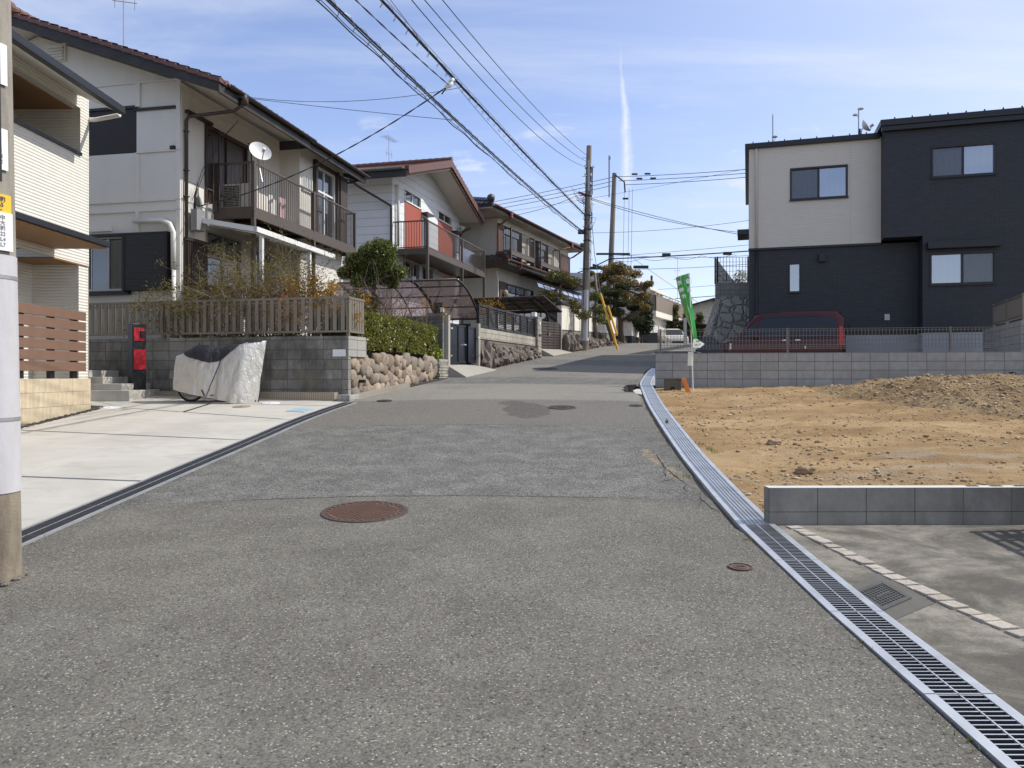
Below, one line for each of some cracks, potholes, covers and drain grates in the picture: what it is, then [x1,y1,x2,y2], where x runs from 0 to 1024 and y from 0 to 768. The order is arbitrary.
drain grate [223,436,272,449]
drain grate [658,422,685,434]
drain grate [646,400,665,408]
drain grate [278,416,317,426]
drain grate [82,482,166,507]
crack [653,452,719,512]
drain grate [22,535,45,547]
manhole cover [320,501,408,523]
manhole cover [728,563,753,571]
drain grate [924,694,1024,768]
drain grate [738,524,819,563]
drain grate [714,497,774,528]
